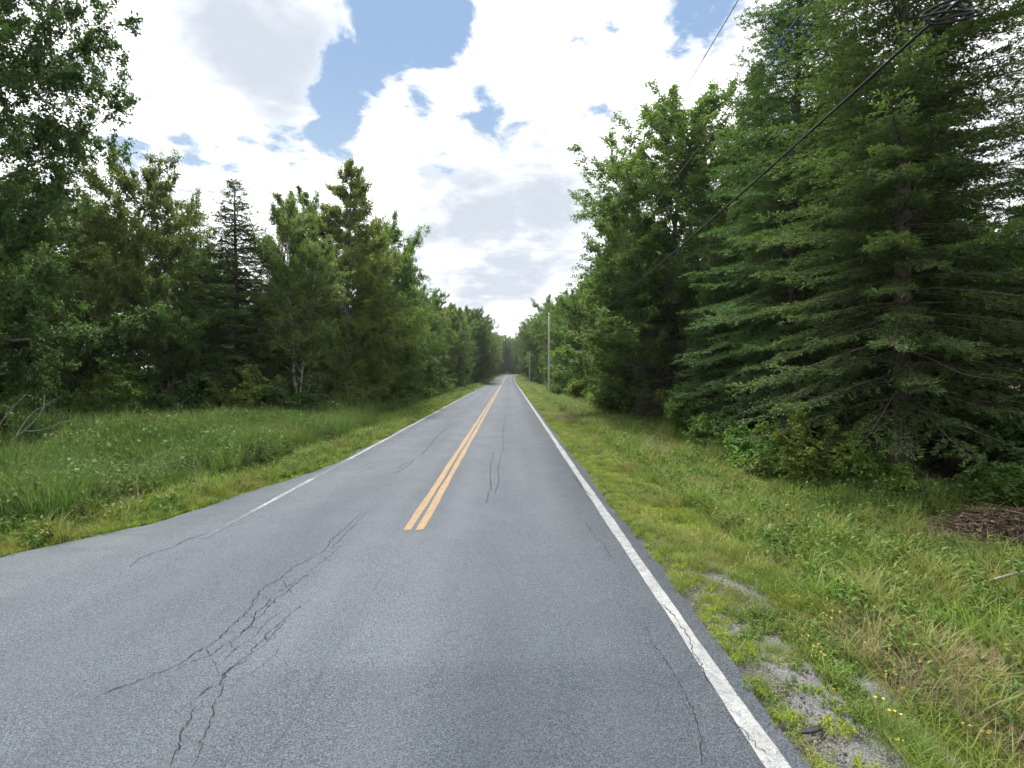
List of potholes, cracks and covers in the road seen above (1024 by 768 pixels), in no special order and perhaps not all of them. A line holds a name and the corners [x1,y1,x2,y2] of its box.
crack [95,512,366,766]
crack [646,602,711,763]
